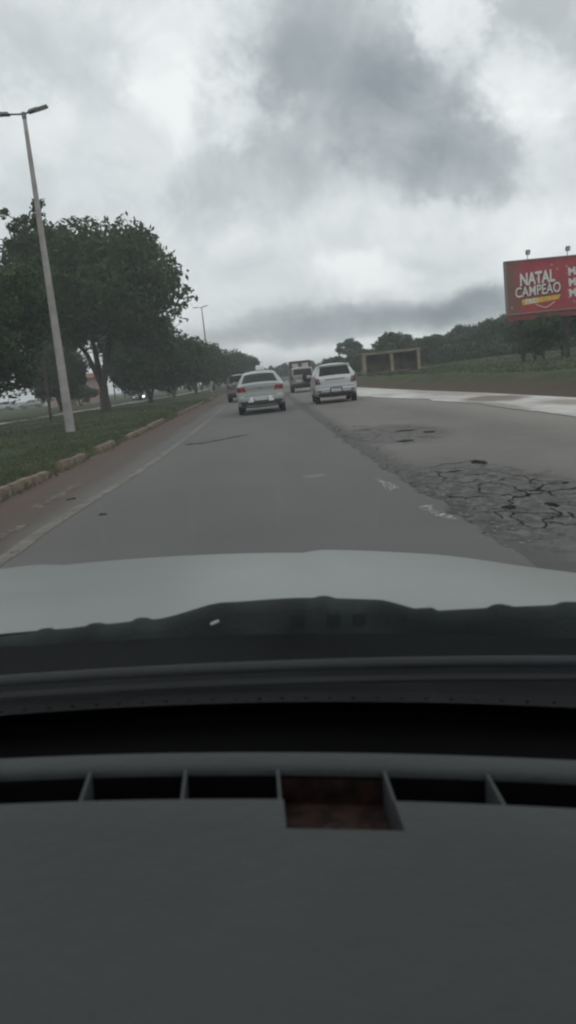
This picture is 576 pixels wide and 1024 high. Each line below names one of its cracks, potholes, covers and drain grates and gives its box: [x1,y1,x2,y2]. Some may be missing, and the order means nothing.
crack [428,462,576,529]
